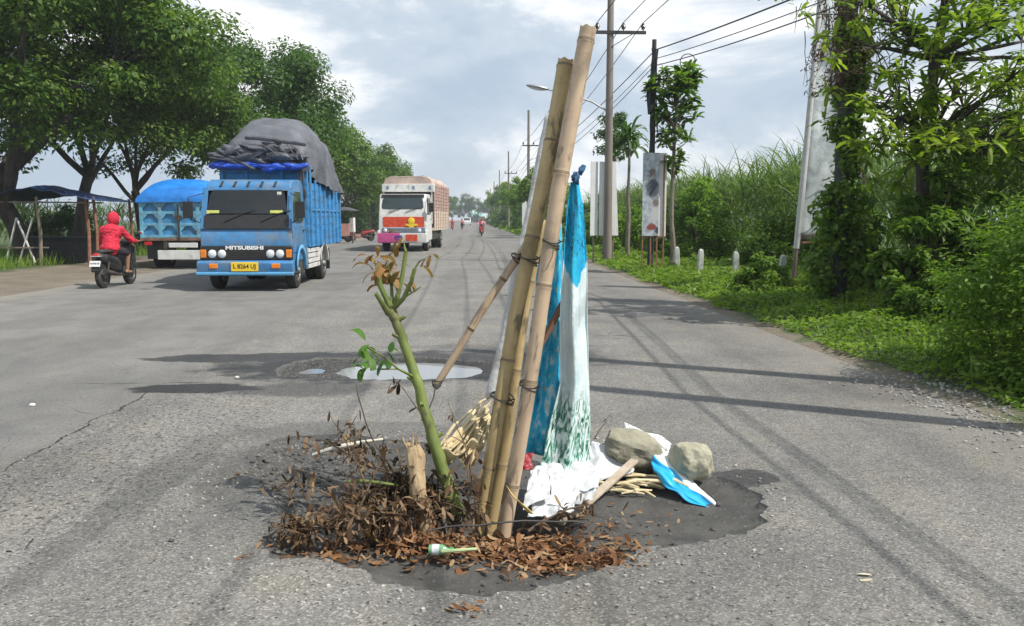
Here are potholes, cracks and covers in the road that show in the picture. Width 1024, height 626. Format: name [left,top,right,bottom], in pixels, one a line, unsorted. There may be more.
pothole [243,434,769,597]
crack [2,382,238,472]
pothole [274,355,493,380]
